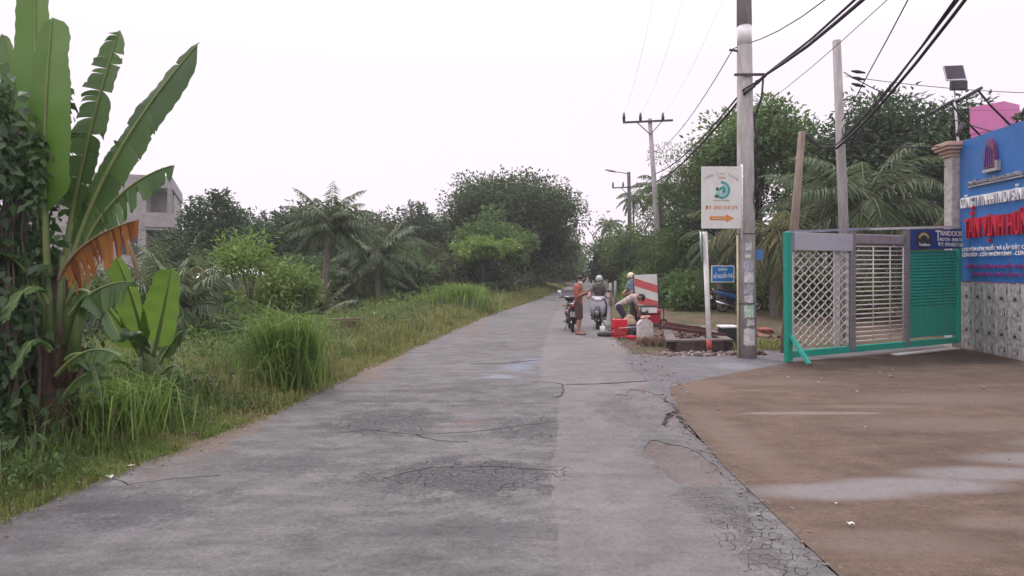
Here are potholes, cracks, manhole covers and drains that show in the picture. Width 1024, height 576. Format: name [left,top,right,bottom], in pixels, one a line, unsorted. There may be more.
crack [695,494,818,576]
pothole [643,440,726,491]
crack [662,398,752,493]
crack [340,410,564,442]
crack [549,380,647,398]
crack [364,460,574,492]
crack [112,475,219,485]
